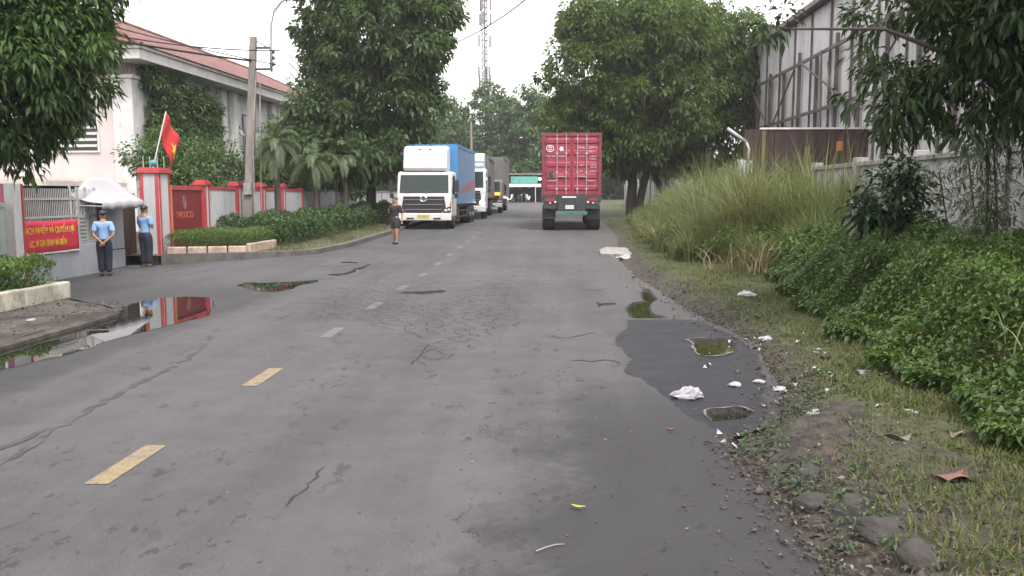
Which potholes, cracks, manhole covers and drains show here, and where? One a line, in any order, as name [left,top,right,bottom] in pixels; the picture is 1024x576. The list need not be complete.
crack [304,276,531,365]
pothole [703,405,755,422]
pothole [625,288,667,319]
crack [285,465,325,507]
pothole [327,264,370,276]
pothole [685,337,738,357]
